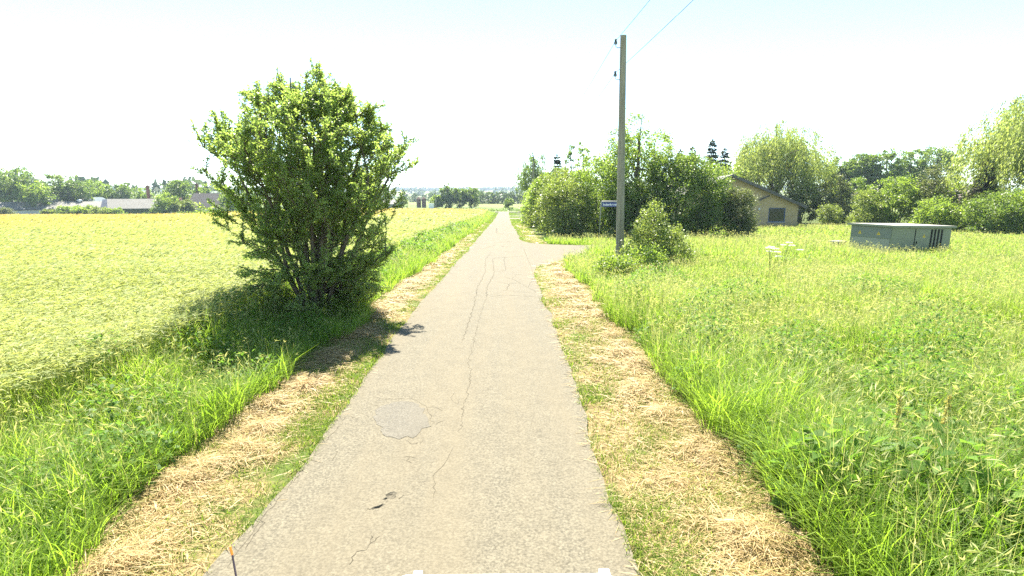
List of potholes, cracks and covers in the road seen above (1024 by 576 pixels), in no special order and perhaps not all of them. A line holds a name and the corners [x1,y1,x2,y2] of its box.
crack [377,224,534,430]
